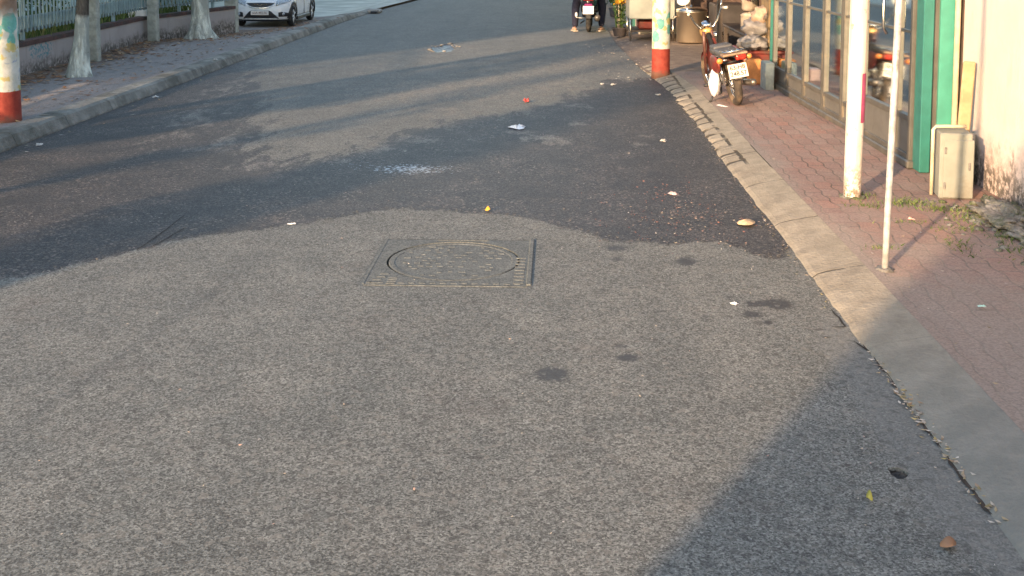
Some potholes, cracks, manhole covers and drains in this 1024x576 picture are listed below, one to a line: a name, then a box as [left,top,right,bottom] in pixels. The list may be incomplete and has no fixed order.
manhole cover [359,239,536,288]
